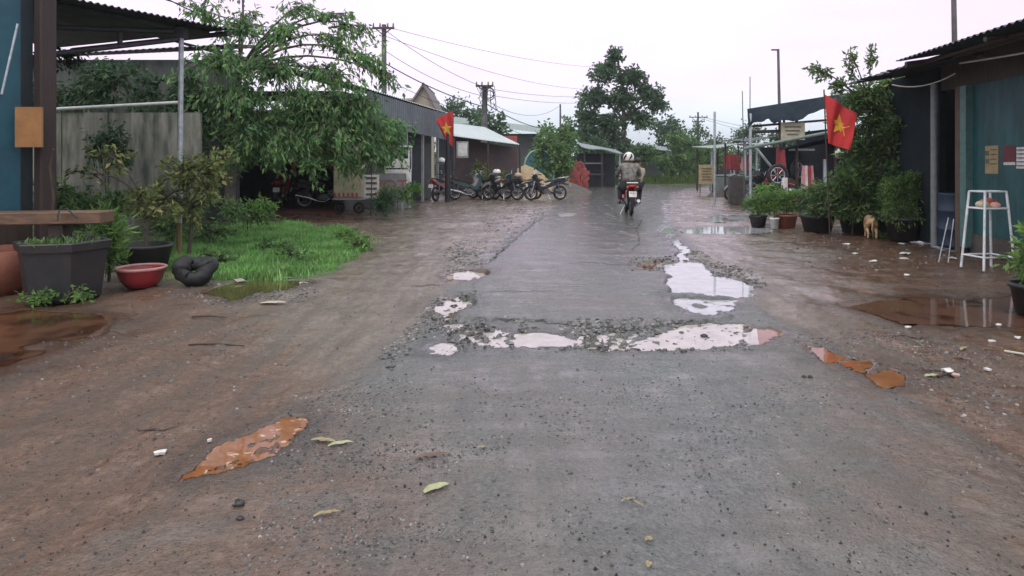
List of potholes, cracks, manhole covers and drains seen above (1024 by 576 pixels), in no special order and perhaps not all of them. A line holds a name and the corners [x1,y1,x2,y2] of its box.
pothole [496,330,589,350]
pothole [851,367,919,390]
pothole [664,292,747,317]
pothole [797,342,856,367]
pothole [428,292,482,318]
crack [485,217,543,265]
pothole [613,319,759,353]
pothole [657,258,764,298]
pothole [442,267,493,281]
pothole [417,339,466,358]
